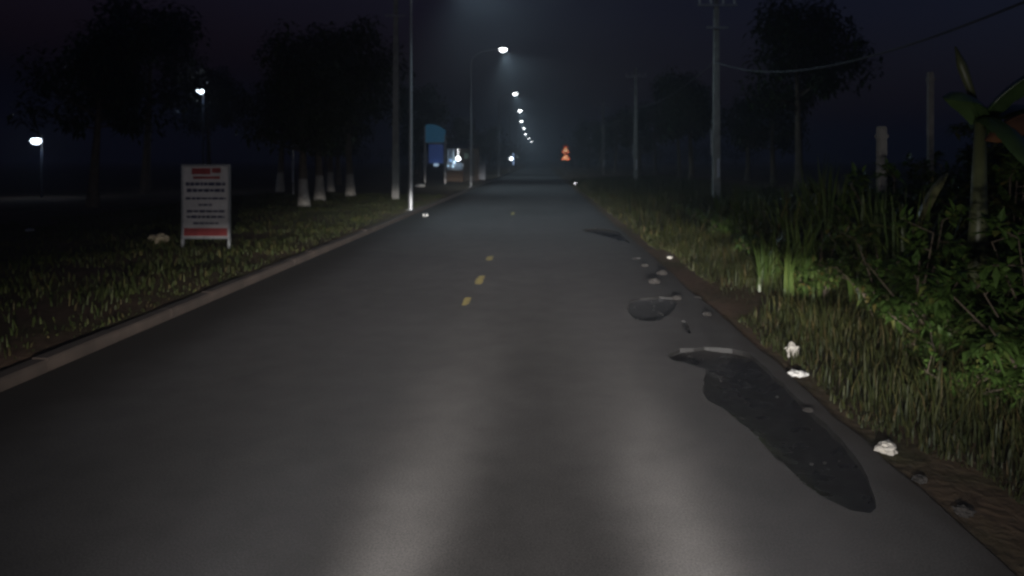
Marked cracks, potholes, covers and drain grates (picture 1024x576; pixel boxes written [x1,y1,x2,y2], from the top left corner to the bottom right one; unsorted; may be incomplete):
pothole [666,347,876,513]
pothole [582,228,630,243]
pothole [627,297,677,321]
